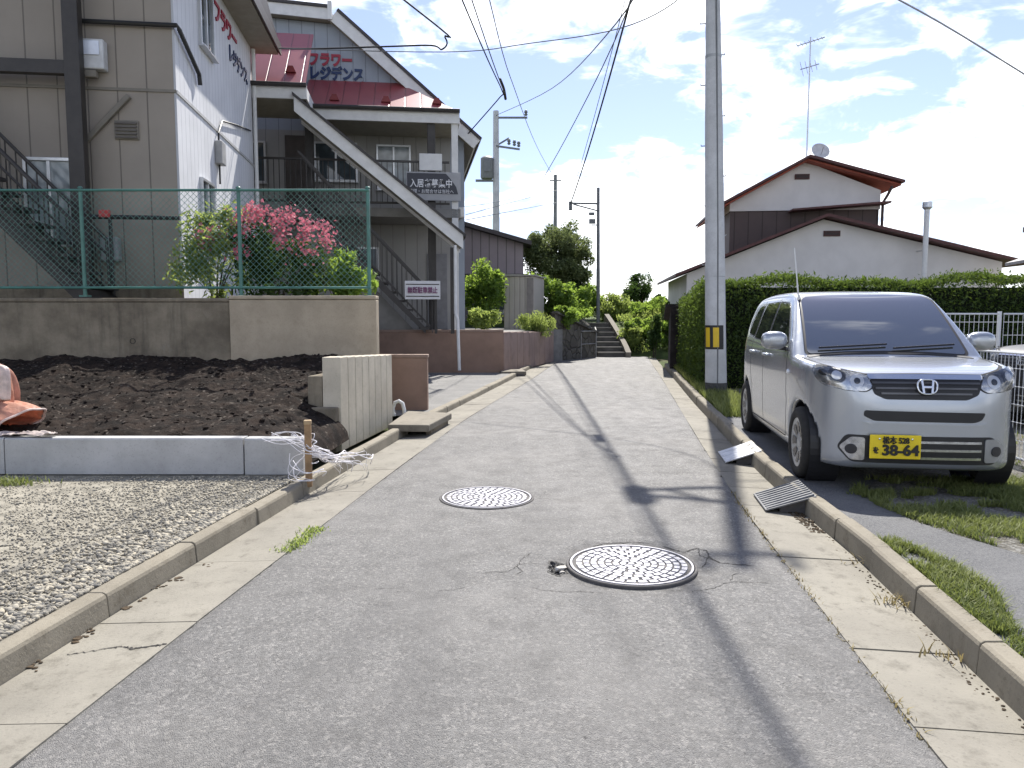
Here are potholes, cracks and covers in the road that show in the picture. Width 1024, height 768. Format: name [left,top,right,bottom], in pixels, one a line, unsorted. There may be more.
manhole cover [566,544,698,590]
crack [67,643,167,655]
crack [664,546,765,596]
manhole cover [439,486,534,510]
crack [487,553,602,593]
